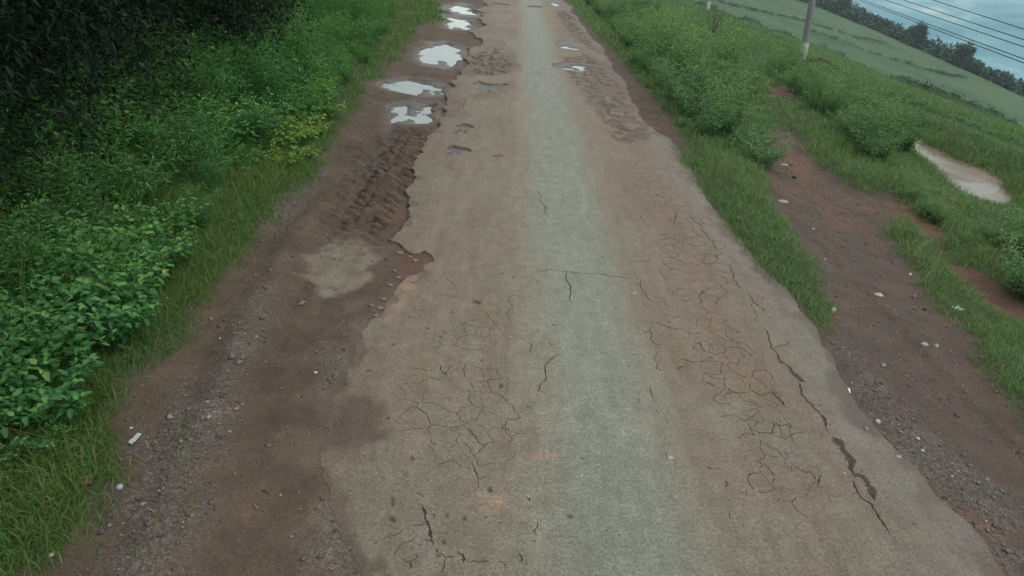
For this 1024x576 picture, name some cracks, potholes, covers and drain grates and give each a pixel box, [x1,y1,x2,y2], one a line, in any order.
pothole [414,40,469,69]
crack [375,492,539,572]
crack [529,342,562,398]
pothole [554,40,589,50]
pothole [438,13,476,31]
